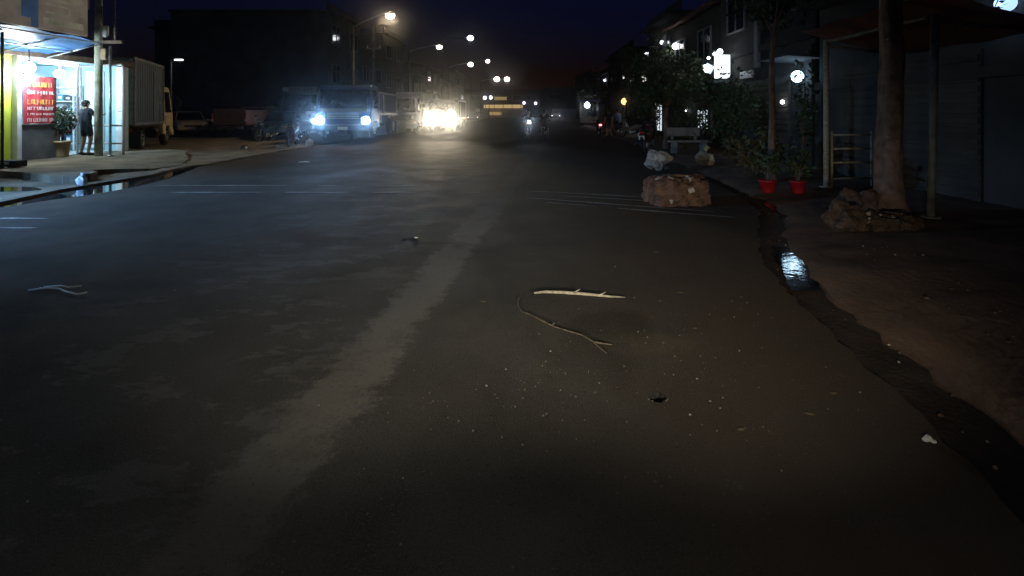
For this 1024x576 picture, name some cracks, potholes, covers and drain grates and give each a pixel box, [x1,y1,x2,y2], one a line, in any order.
pothole [647,391,668,403]
